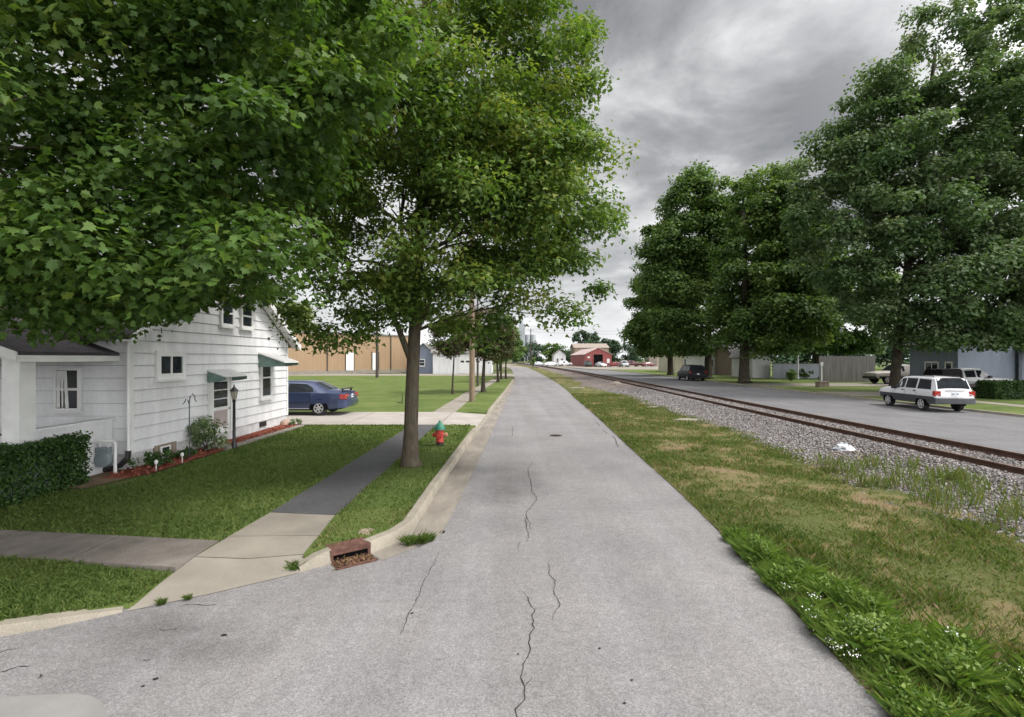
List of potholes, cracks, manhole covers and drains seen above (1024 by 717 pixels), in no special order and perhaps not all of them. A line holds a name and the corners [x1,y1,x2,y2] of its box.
crack [515,561,560,717]
crack [517,463,537,548]
drain grate [325,537,378,570]
crack [400,552,439,635]
